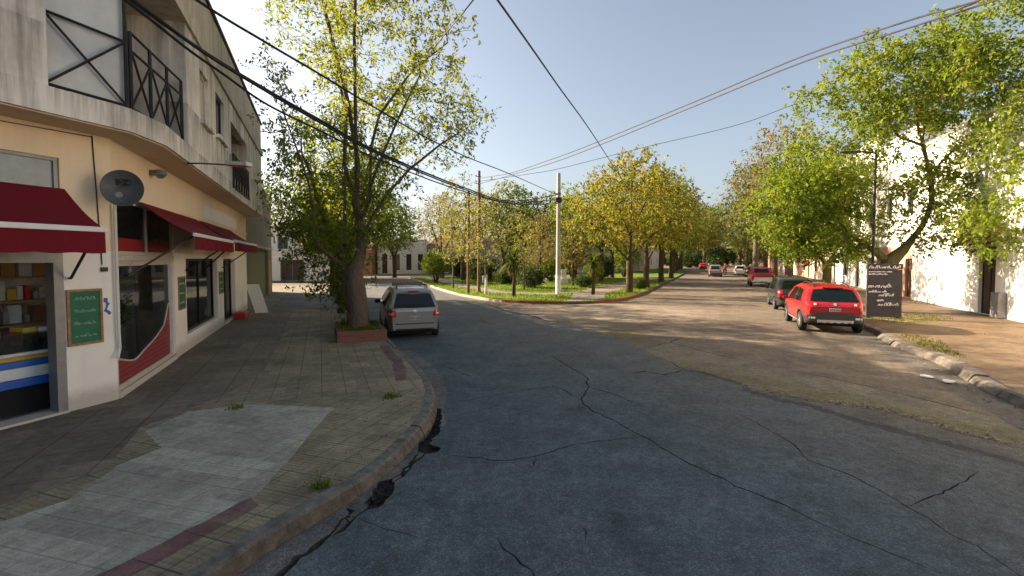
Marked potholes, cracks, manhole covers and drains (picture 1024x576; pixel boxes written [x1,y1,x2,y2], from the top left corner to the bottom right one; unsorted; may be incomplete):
pothole [364,478,395,510]
crack [446,345,942,575]
crack [743,416,1018,575]
crack [390,454,424,483]
pothole [418,408,442,455]
